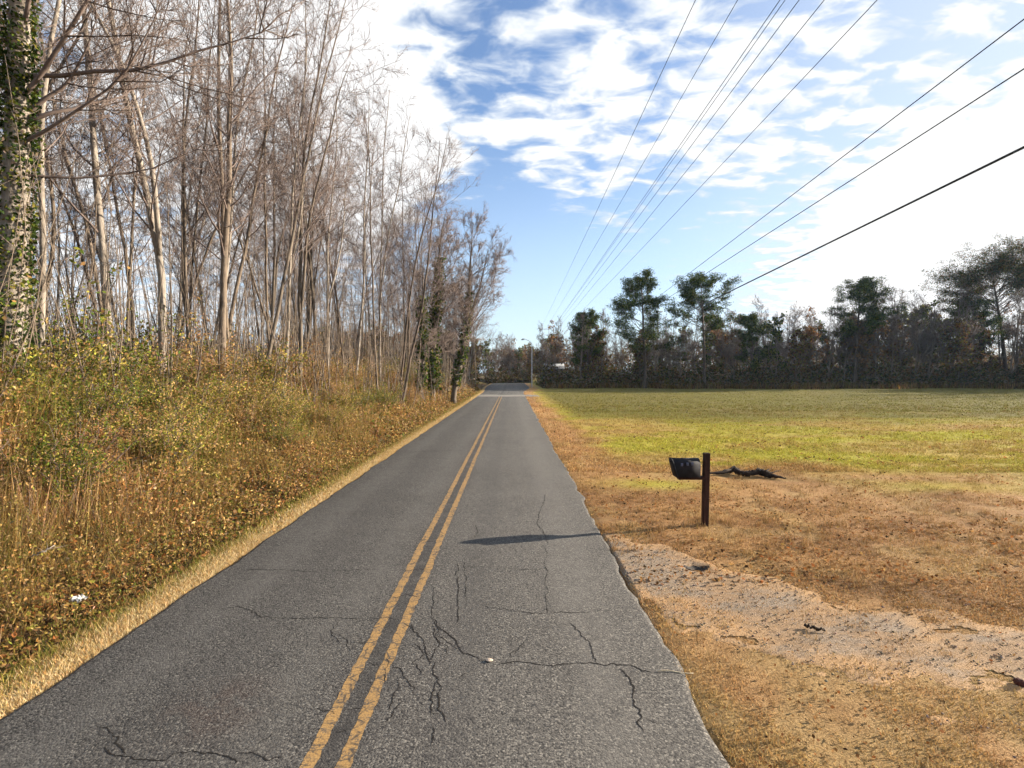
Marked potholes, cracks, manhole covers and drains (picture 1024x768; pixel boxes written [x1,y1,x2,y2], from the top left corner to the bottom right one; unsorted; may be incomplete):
crack [97,727,276,763]
crack [222,501,660,746]
